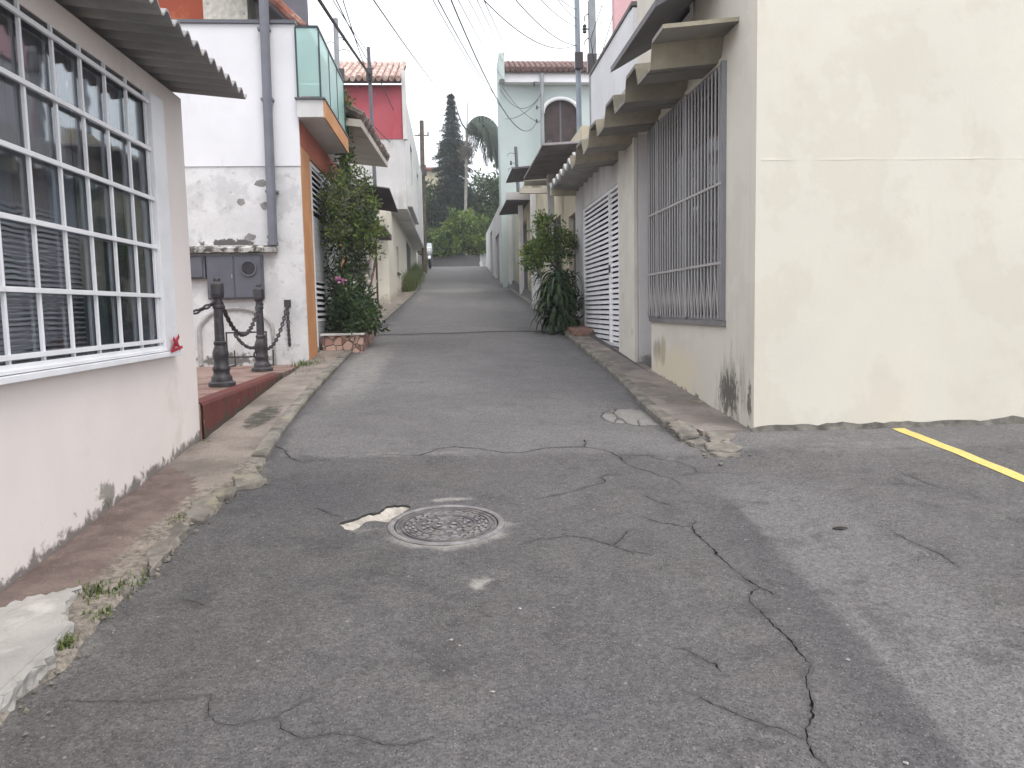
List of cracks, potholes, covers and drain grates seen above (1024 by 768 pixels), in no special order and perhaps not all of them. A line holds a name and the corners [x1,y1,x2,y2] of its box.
pothole [340,505,410,530]
manhole cover [388,505,504,546]
crack [413,440,697,497]
crack [79,696,428,746]
crack [649,519,829,768]
